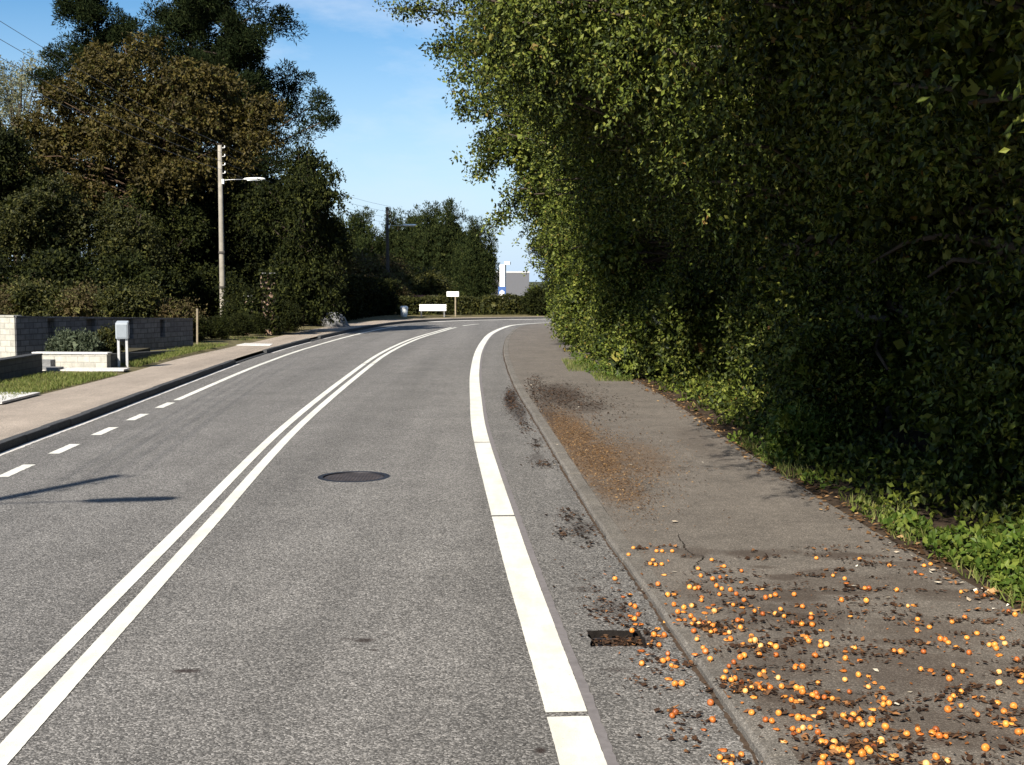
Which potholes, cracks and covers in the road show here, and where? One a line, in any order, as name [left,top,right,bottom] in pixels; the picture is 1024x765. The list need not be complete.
drain grate [586,630,648,647]
crack [678,533,719,579]
manhole cover [317,471,390,482]
